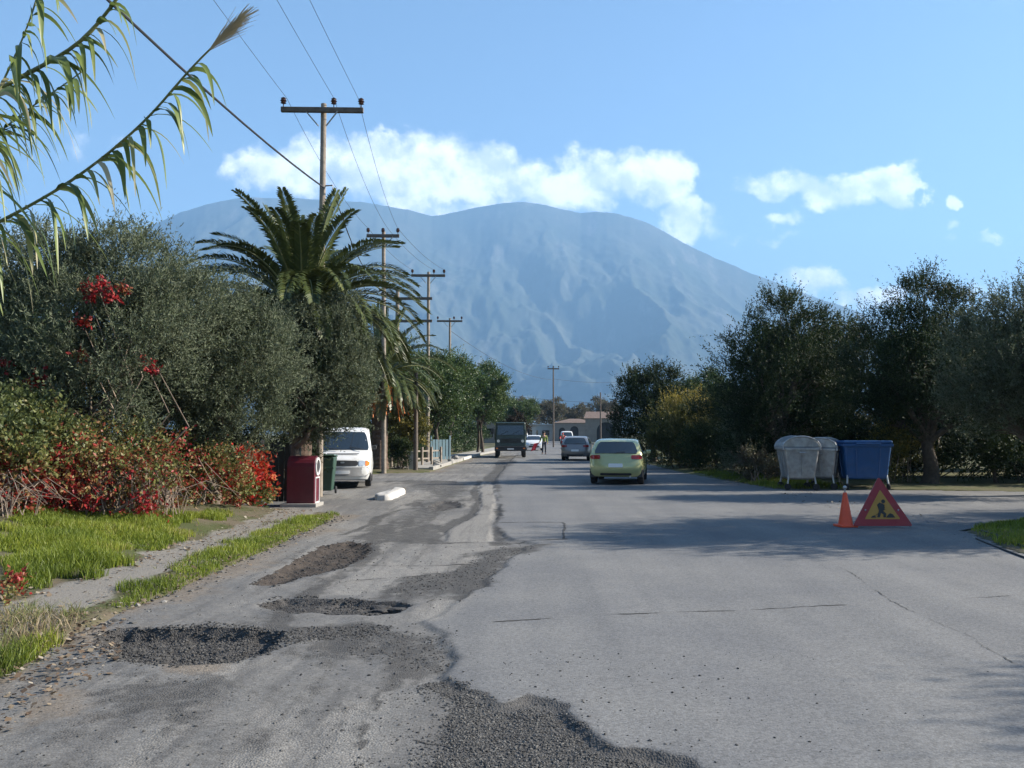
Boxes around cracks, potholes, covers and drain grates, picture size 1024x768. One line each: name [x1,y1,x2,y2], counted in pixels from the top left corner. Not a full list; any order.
pothole [92,626,286,665]
crack [838,565,1016,664]
pothole [256,598,413,616]
pothole [251,541,373,586]
